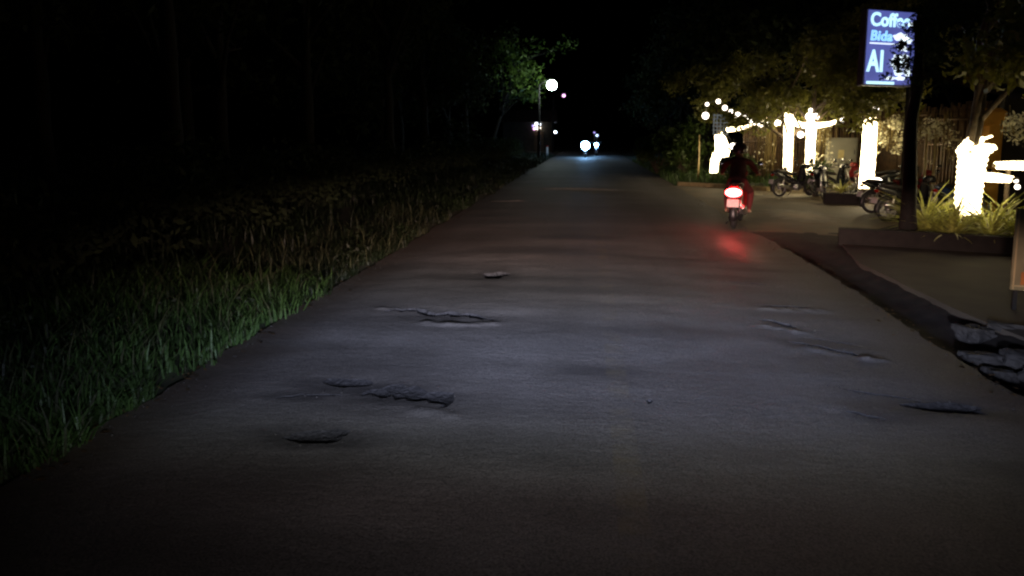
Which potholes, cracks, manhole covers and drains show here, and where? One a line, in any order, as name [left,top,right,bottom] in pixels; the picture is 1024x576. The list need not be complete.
crack [840,388,920,420]
pothole [282,429,351,444]
pothole [361,384,454,408]
crack [789,338,862,356]
pothole [899,402,988,415]
pothole [322,378,373,388]
pothole [384,308,493,320]
